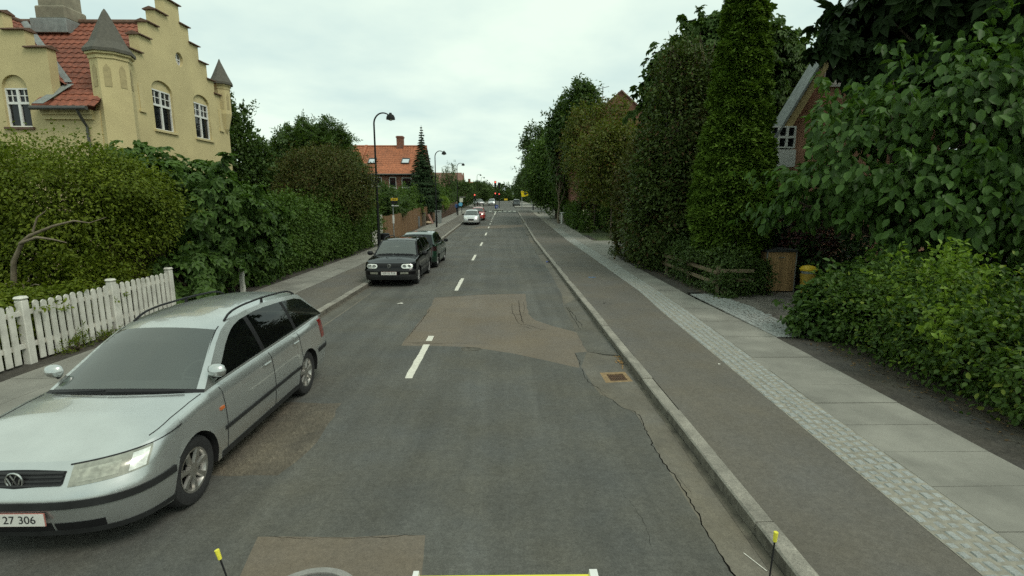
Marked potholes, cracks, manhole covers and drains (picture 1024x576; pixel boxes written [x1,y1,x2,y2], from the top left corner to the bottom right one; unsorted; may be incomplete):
crack [575,354,736,576]
